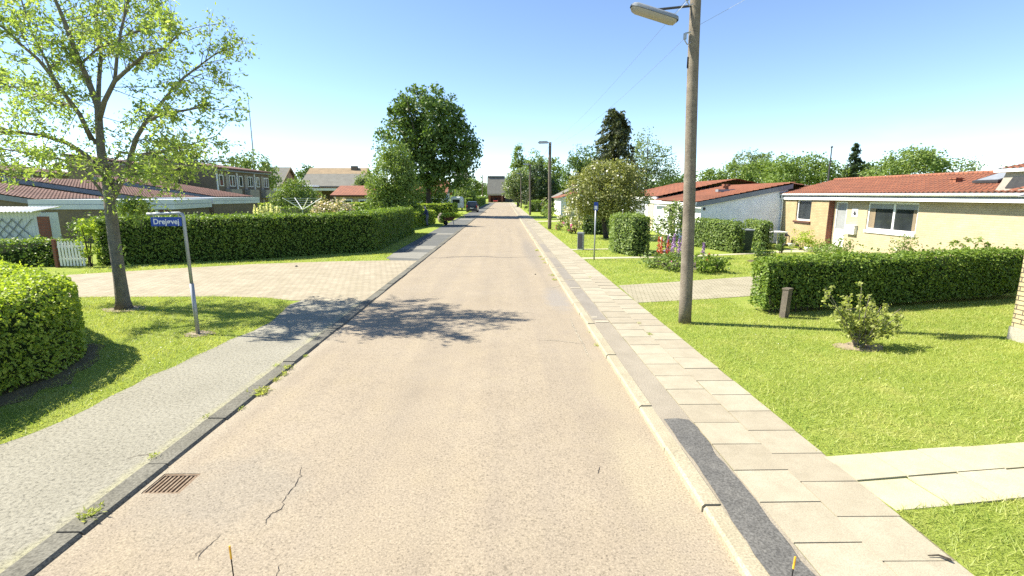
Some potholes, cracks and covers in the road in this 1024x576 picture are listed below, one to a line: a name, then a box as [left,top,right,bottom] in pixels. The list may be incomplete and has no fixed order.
drain grate [142,474,200,494]
